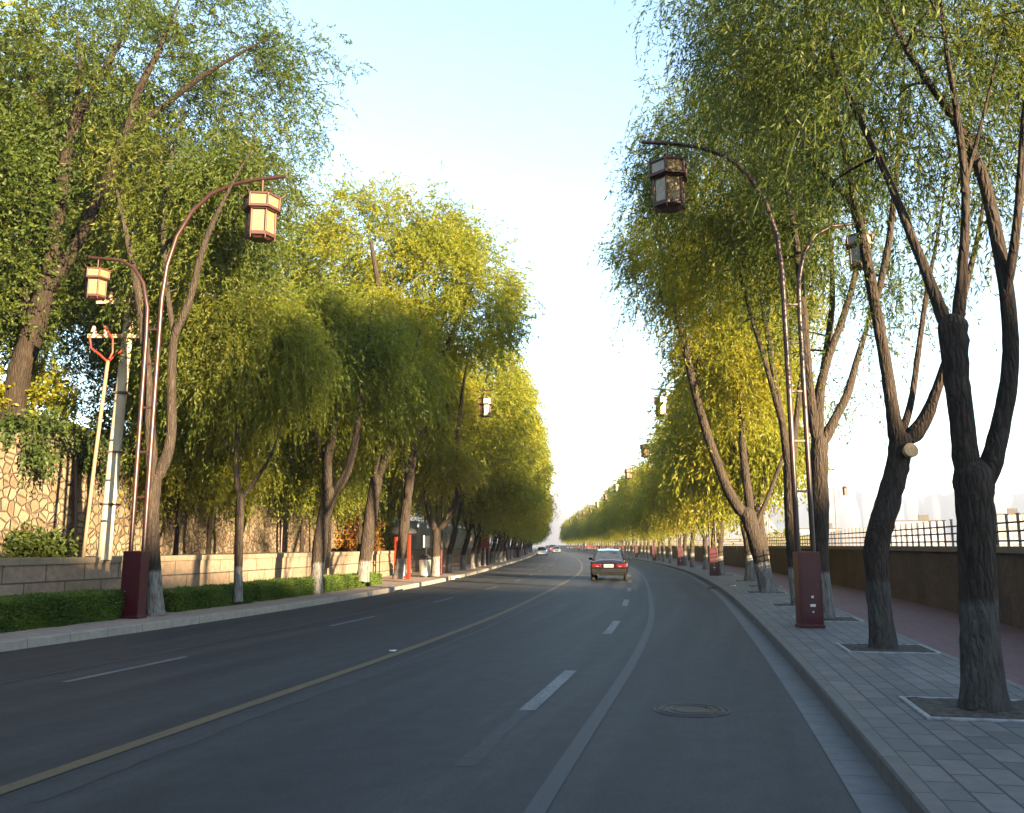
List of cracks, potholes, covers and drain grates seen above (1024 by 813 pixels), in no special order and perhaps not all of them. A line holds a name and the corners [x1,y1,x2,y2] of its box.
manhole cover [653,703,731,717]
